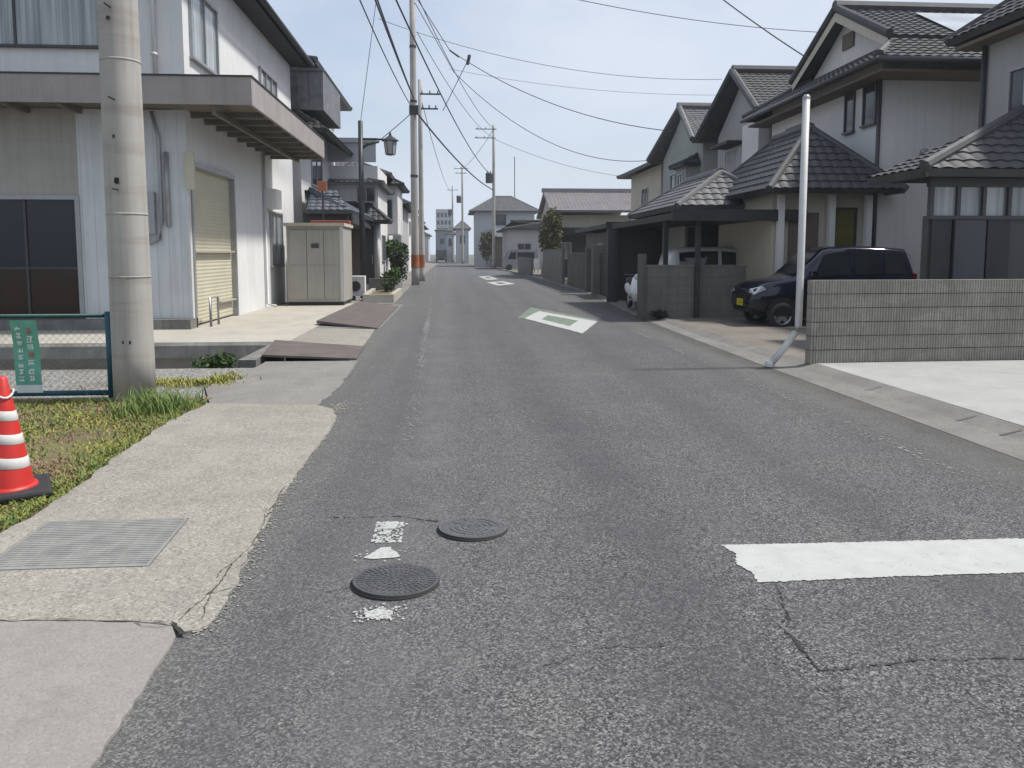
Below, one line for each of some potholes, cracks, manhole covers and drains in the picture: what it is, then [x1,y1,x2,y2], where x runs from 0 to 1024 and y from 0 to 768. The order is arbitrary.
manhole cover [351,563,440,601]
manhole cover [437,516,508,542]
drain grate [0,518,188,570]
crack [0,487,285,634]
crack [776,584,1024,671]
crack [542,642,665,666]
